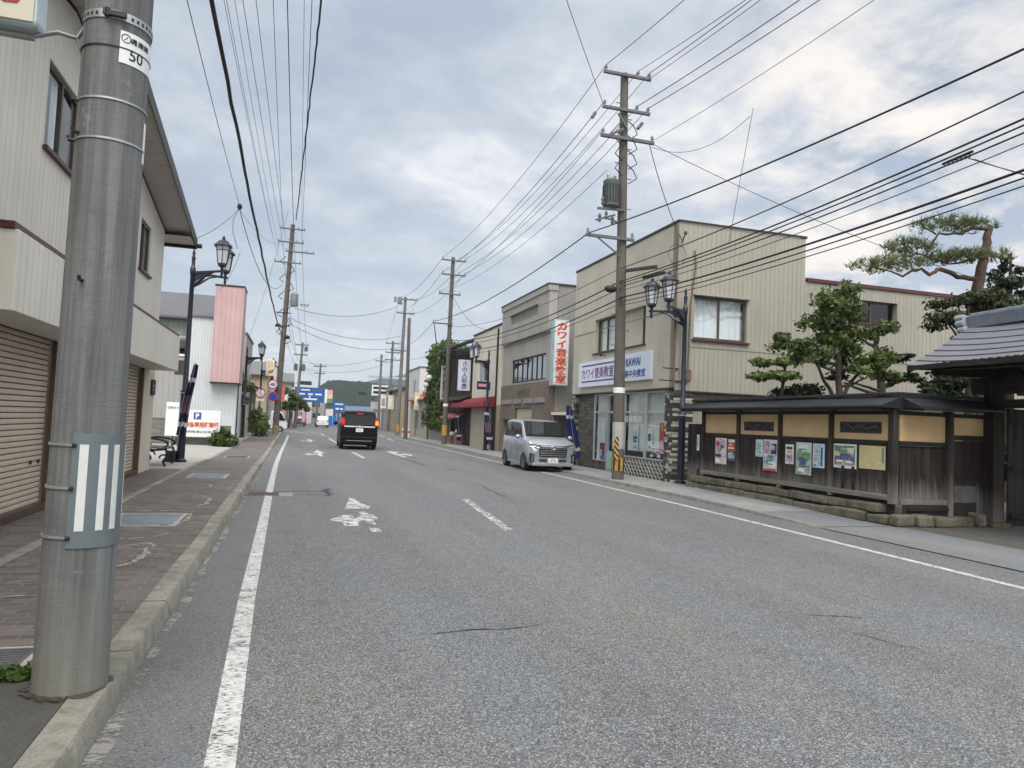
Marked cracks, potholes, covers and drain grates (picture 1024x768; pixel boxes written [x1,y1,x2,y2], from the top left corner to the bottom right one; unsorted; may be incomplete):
manhole cover [121,513,188,526]
crack [392,624,540,654]
